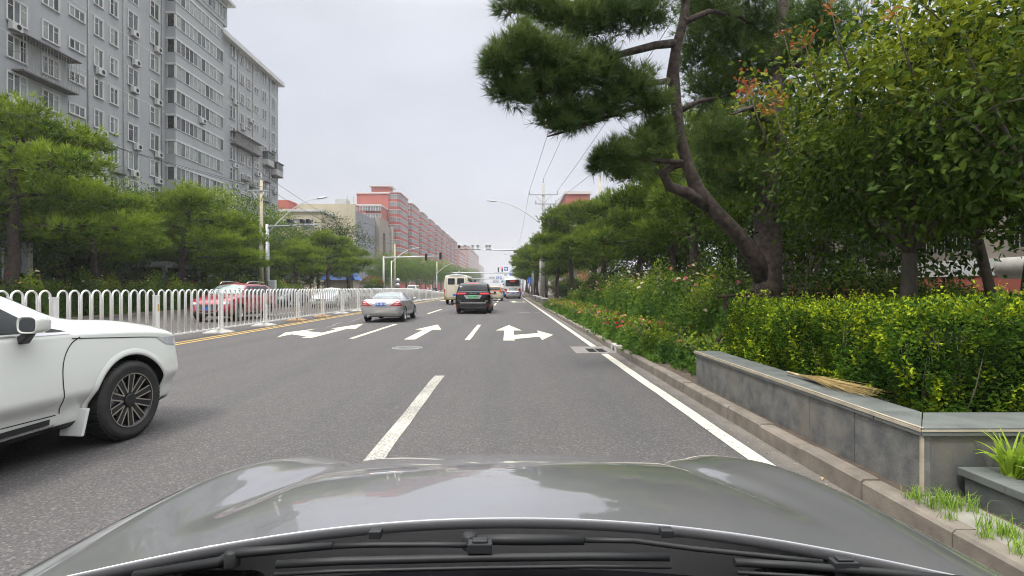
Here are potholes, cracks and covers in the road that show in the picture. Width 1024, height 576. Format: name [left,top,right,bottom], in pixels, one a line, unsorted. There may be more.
drain grate [570,346,618,354]
